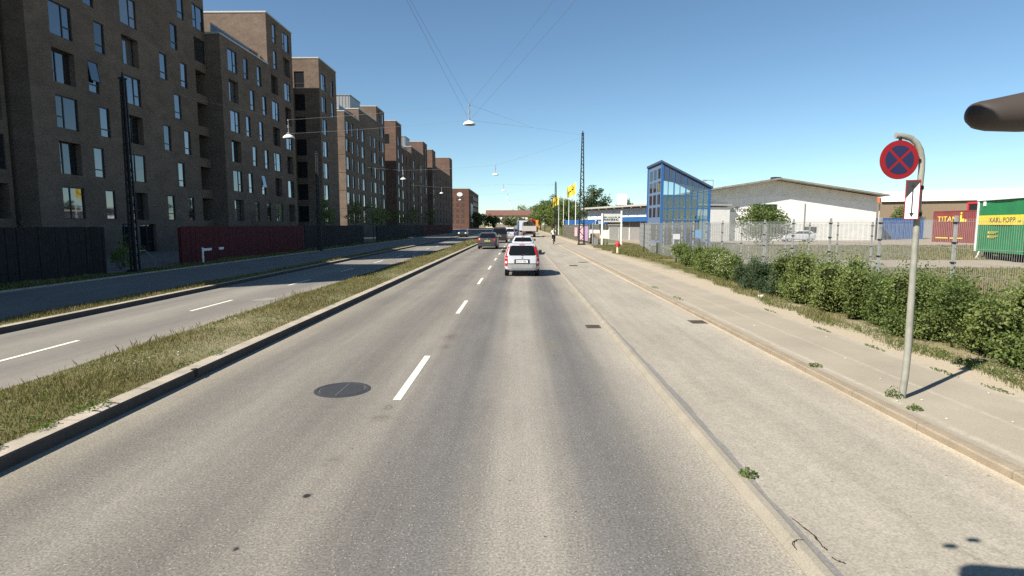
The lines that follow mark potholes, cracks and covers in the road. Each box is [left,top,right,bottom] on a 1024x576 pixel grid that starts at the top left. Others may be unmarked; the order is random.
manhole cover [314,382,371,398]
crack [791,517,846,564]
